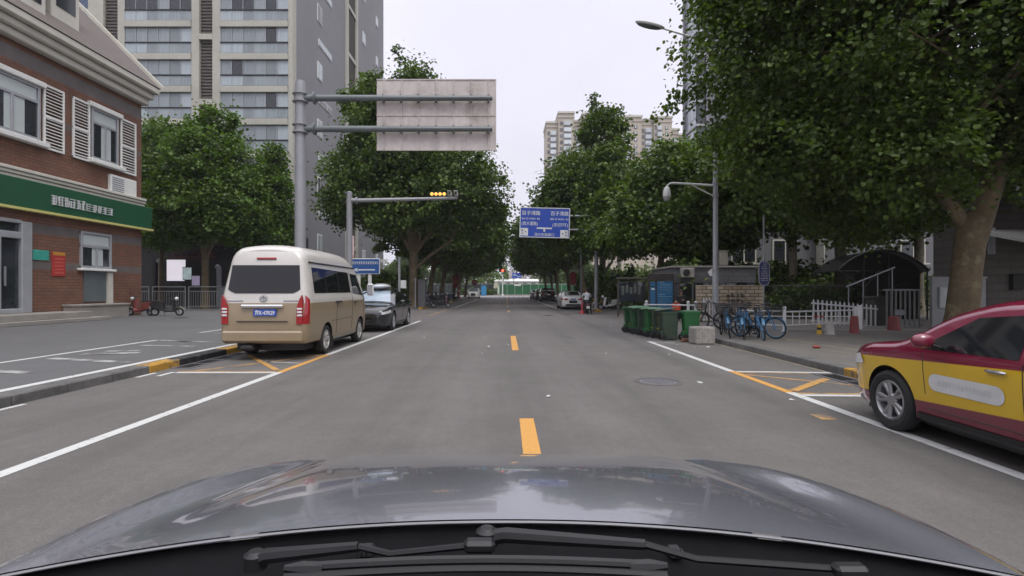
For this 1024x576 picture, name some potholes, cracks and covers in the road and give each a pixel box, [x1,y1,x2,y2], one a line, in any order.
manhole cover [633,377,684,386]
drain grate [813,374,859,387]
